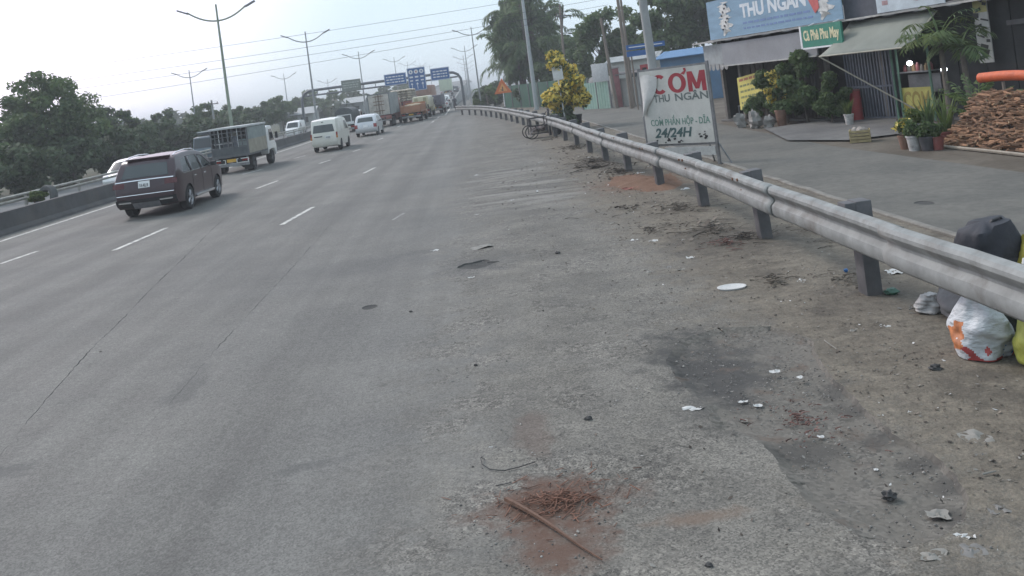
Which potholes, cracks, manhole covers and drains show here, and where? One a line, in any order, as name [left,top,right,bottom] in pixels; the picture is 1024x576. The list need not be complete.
pothole [457,259,500,269]
crack [2,219,223,452]
